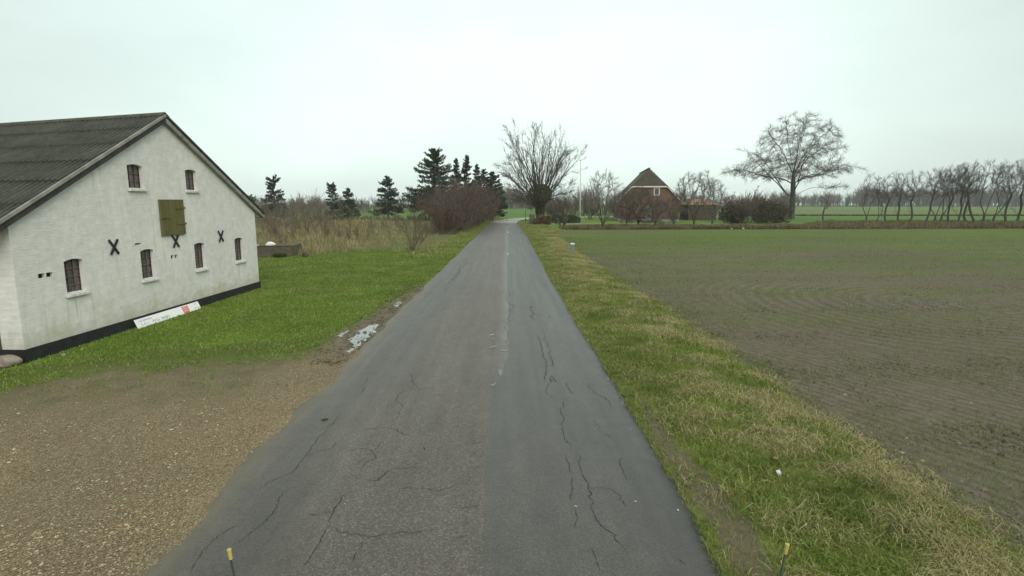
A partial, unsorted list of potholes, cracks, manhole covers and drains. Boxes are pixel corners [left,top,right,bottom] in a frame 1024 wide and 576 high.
crack [251,368,455,494]
crack [306,496,428,563]
crack [530,310,628,554]
